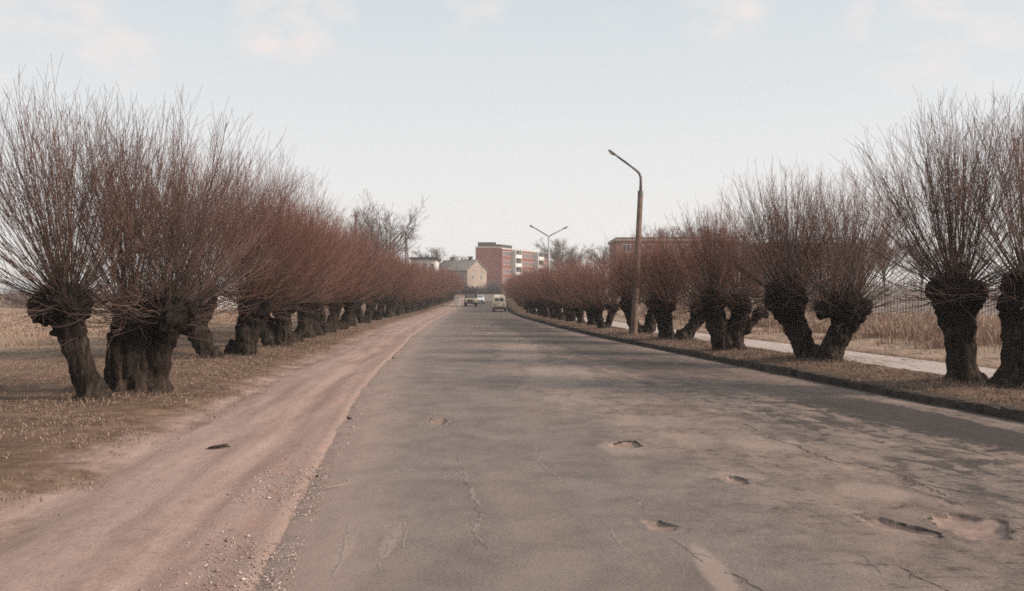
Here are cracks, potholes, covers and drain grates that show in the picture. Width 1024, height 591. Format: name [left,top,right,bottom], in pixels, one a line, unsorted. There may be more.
crack [323,525,351,580]
pothole [630,517,690,535]
crack [375,522,410,570]
pothole [603,439,649,450]
crack [711,413,992,505]
pothole [916,510,1024,545]
crack [603,496,764,591]
pothole [847,513,955,541]
crack [326,454,490,549]
pothole [423,417,453,426]
pothole [712,474,757,487]
